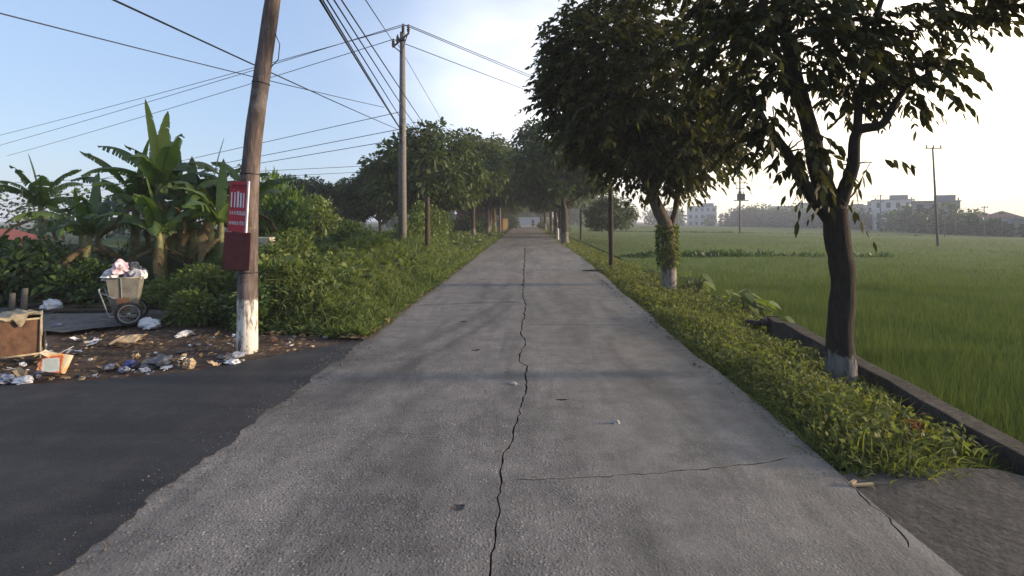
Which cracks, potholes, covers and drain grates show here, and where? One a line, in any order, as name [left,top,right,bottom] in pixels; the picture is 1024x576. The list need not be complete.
crack [838,474,909,548]
crack [417,248,786,576]
